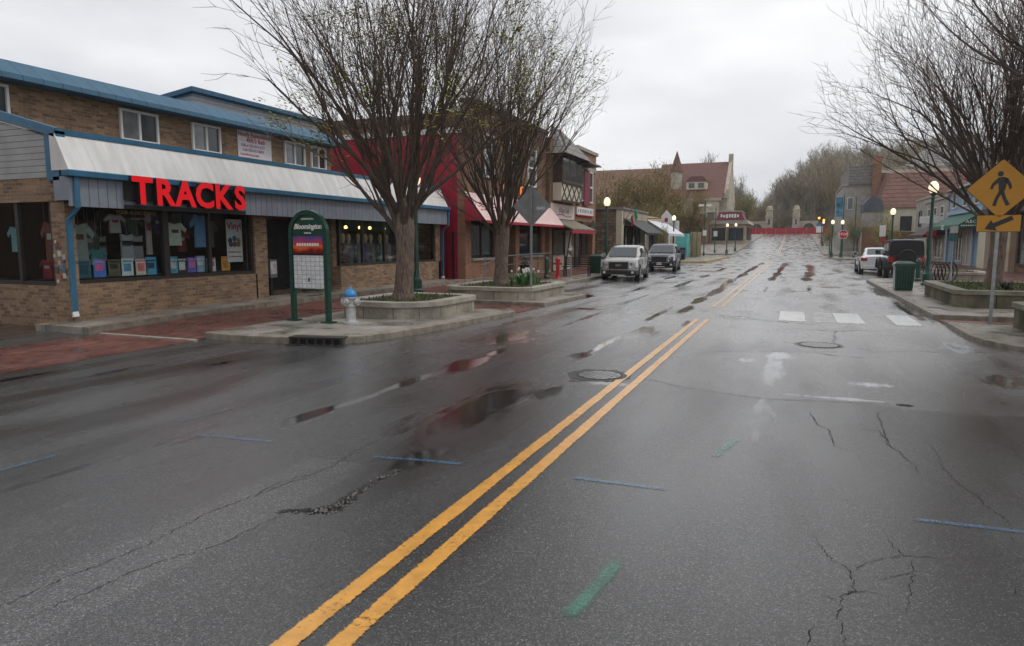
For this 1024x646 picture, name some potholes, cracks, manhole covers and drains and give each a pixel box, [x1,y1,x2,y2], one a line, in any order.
manhole cover [568,369,631,382]
pothole [275,469,402,516]
crack [924,441,1015,546]
drain grate [286,335,348,347]
crack [818,539,936,641]
